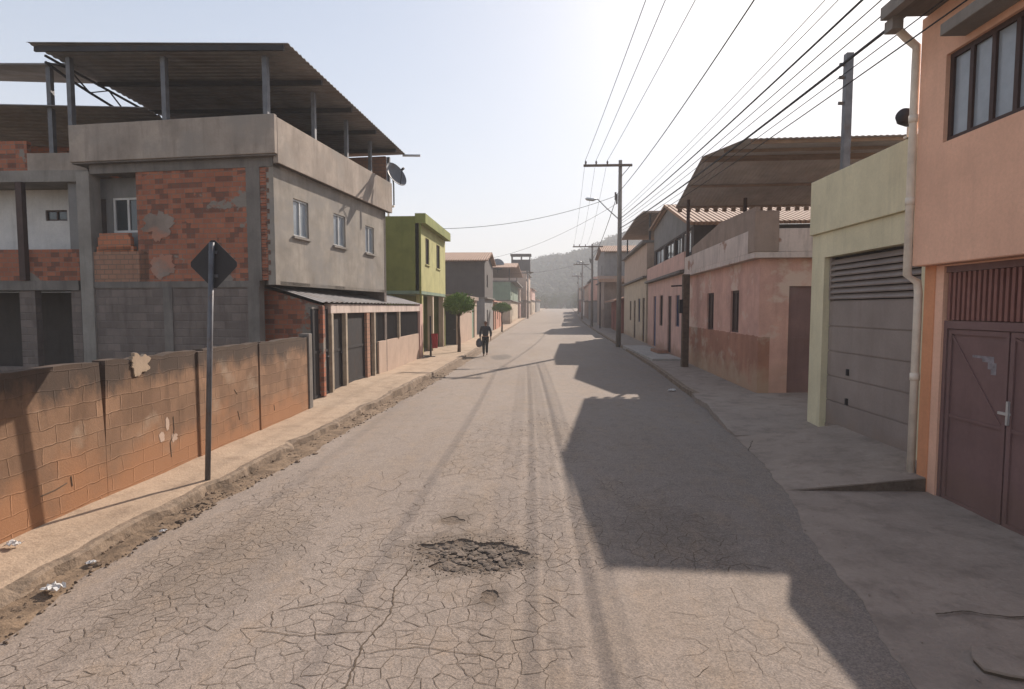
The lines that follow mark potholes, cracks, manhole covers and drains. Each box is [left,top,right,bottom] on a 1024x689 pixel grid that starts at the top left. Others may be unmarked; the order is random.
pothole [402,534,542,578]
crack [190,486,615,689]
crack [0,469,355,689]
crack [935,610,1024,618]
pothole [440,516,465,525]
pothole [480,590,499,603]
